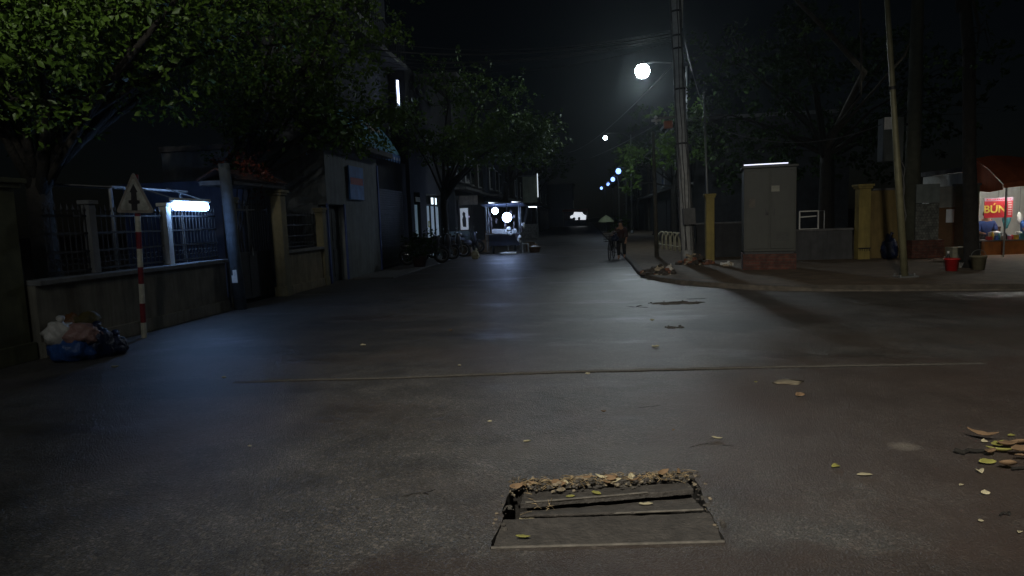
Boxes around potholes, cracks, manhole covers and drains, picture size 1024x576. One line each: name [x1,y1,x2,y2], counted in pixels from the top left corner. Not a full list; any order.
manhole cover [490,467,726,549]
